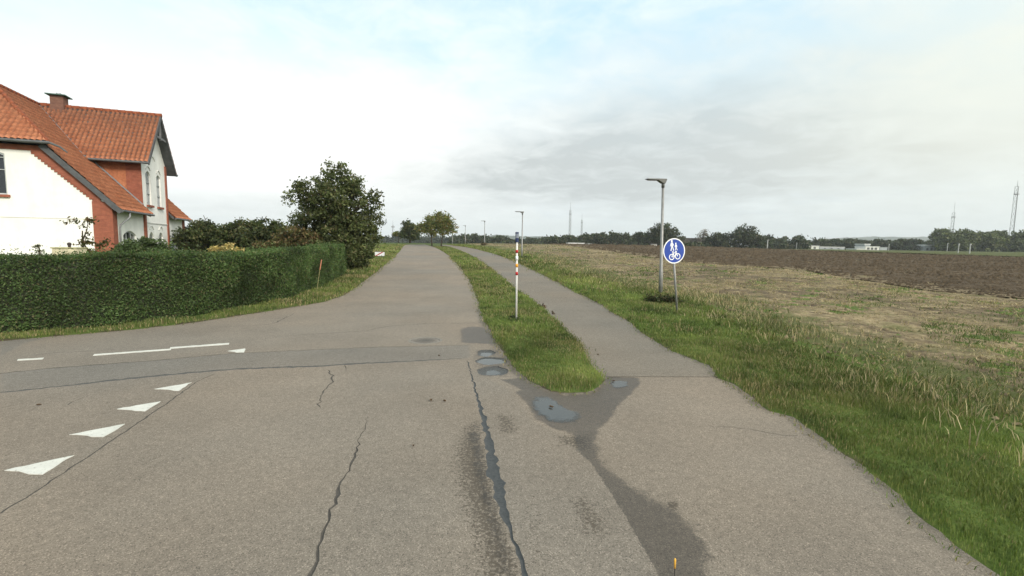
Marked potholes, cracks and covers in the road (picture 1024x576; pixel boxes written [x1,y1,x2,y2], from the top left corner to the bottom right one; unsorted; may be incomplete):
crack [307,417,368,576]
pothole [475,357,507,365]
pothole [477,366,508,376]
